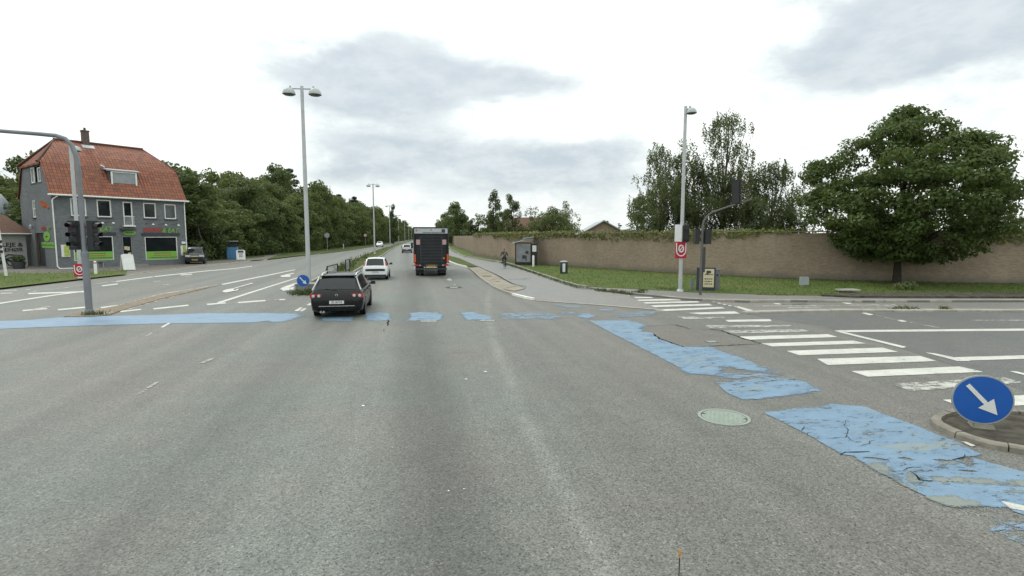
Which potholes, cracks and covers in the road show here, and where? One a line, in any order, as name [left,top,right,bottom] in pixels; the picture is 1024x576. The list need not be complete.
crack [904,449,969,483]
crack [650,324,759,347]
manhole cover [698,409,751,426]
crack [802,421,889,454]
